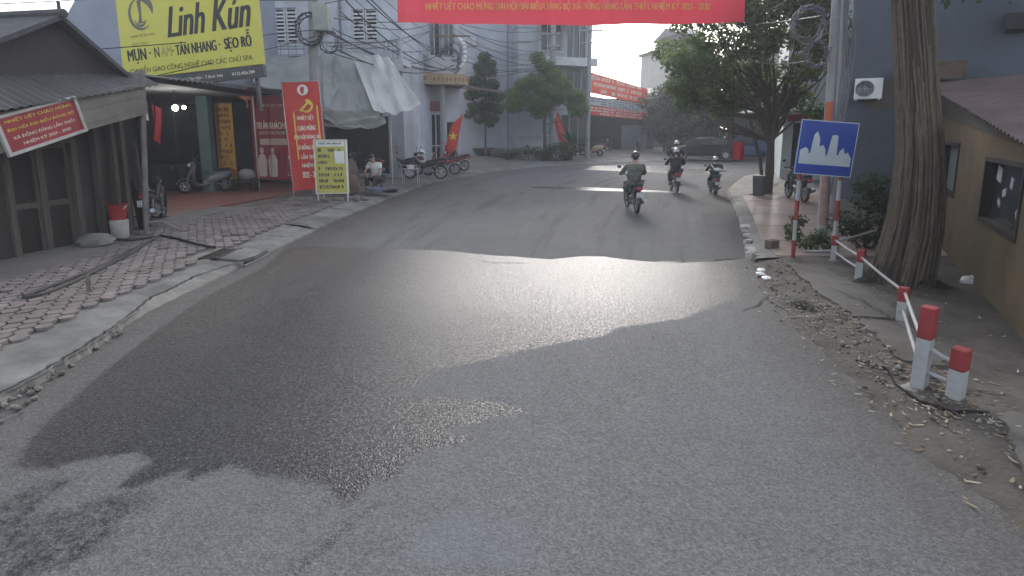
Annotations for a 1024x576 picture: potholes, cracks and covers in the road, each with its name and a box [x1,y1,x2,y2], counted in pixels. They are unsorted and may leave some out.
crack [830,287,904,329]
